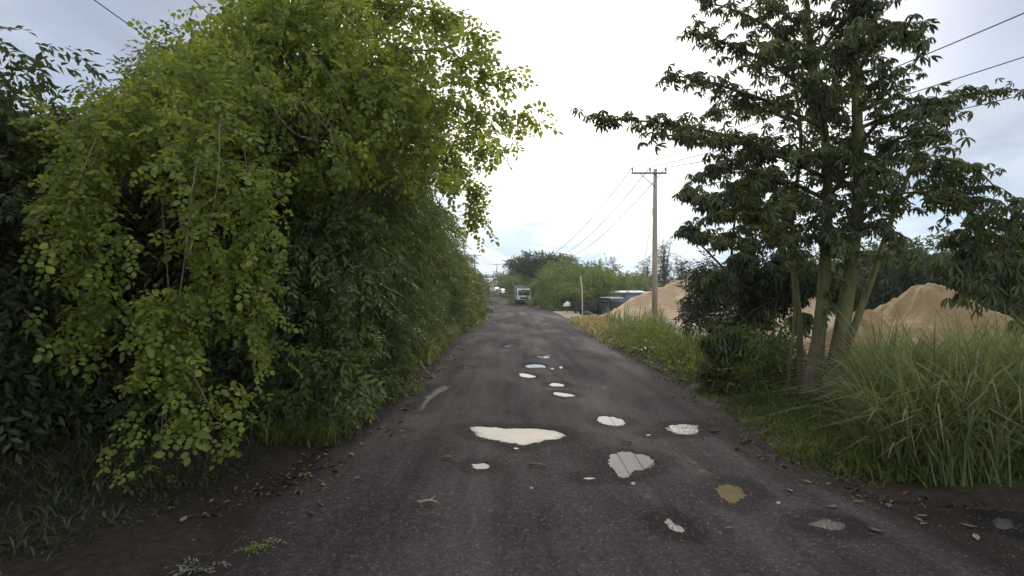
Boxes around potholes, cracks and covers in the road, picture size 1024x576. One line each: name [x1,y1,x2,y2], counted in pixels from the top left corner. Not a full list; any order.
pothole [603,449,661,479]
pothole [468,461,494,470]
pothole [804,515,854,534]
pothole [702,480,754,507]
pothole [658,421,704,436]
pothole [467,425,568,446]
pothole [987,516,1024,532]
pothole [664,517,685,532]
pothole [594,414,630,427]
